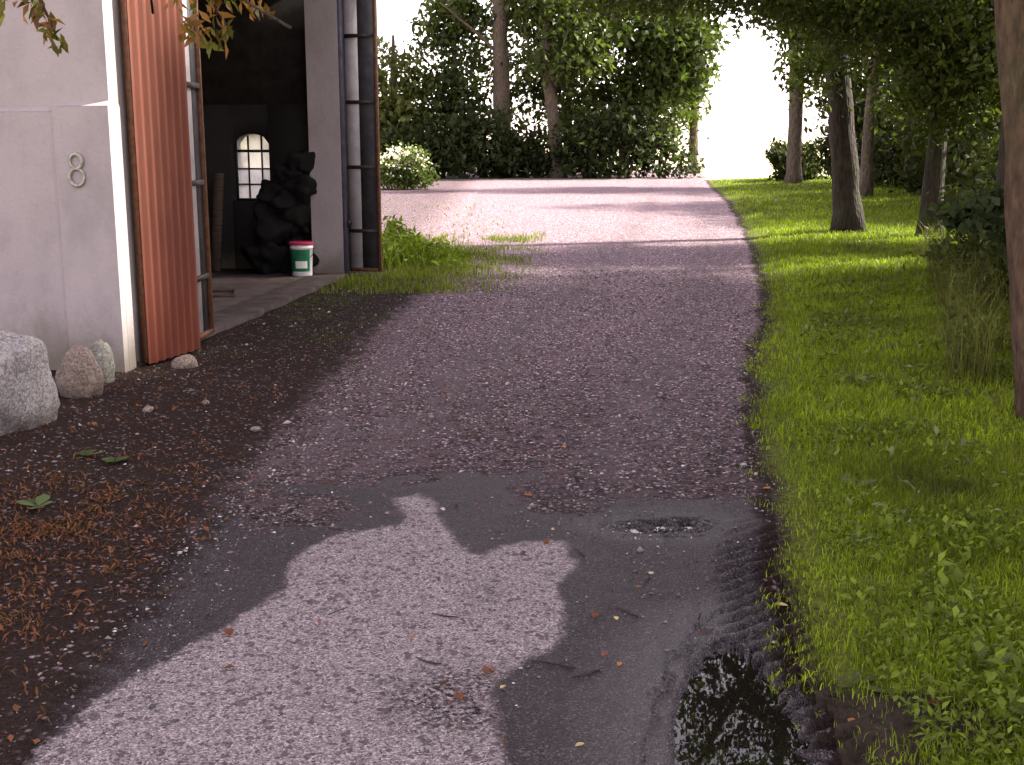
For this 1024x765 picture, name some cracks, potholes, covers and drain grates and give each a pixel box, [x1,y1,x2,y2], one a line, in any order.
pothole [598,515,722,537]
pothole [641,607,835,765]
